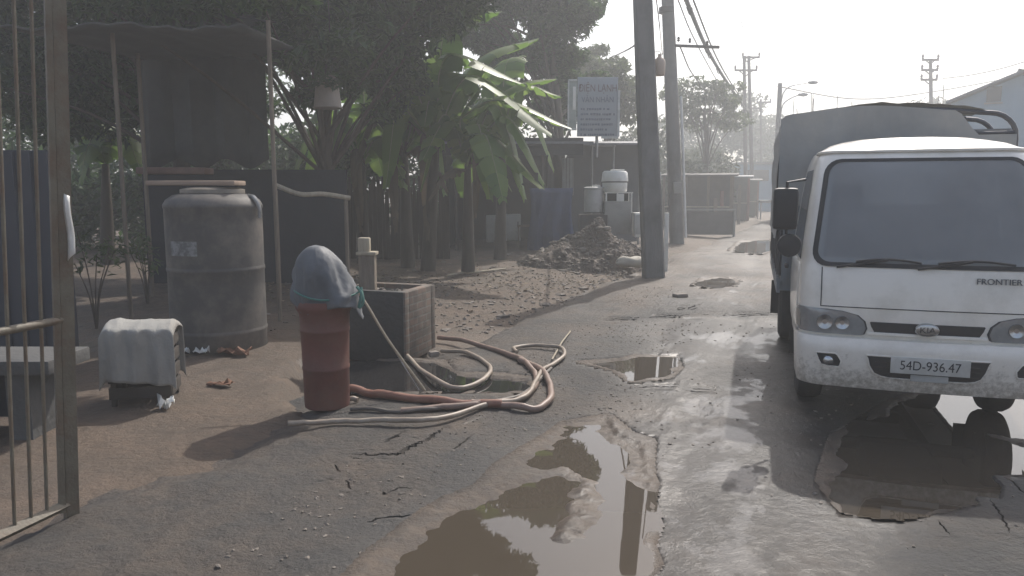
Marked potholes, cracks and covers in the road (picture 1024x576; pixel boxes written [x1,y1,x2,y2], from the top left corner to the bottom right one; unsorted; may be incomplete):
pothole [691,276,740,289]
pothole [729,239,771,255]
pothole [814,392,1024,521]
crack [317,425,480,529]
pothole [340,414,664,576]
pothole [575,353,684,384]
crack [924,475,1024,537]
